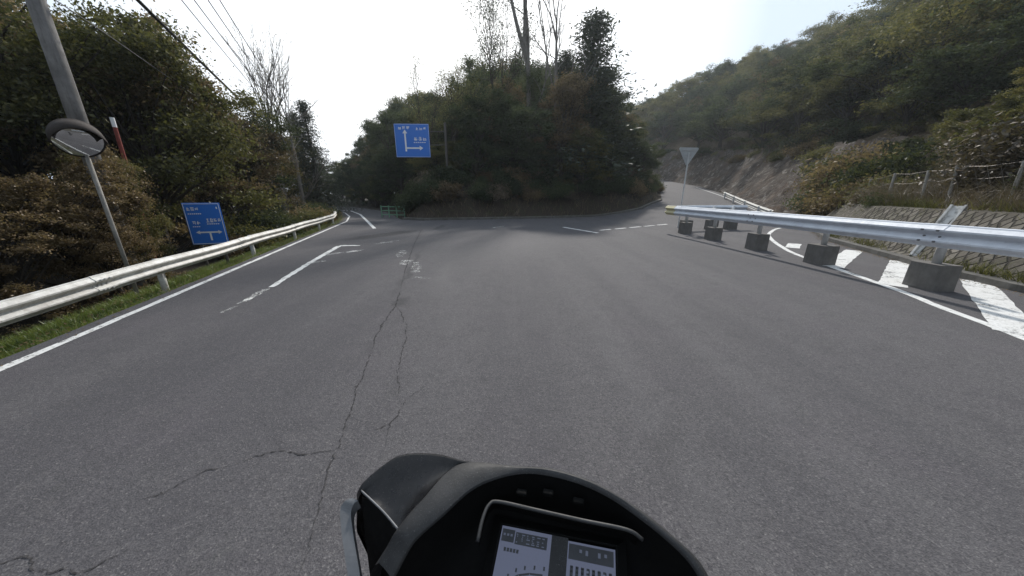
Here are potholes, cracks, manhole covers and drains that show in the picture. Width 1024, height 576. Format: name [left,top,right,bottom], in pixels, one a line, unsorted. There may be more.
crack [135,231,421,570]
crack [0,549,128,574]
